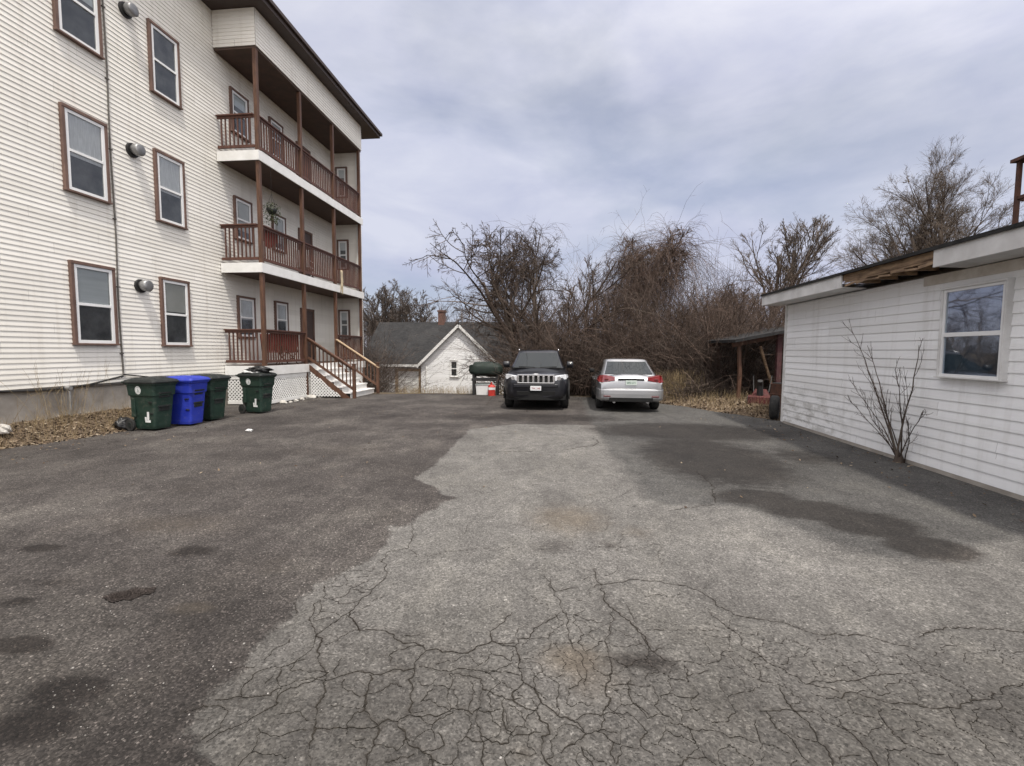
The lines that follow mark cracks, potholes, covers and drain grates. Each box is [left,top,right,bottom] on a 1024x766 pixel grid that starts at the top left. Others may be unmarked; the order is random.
crack [187,443,731,766]
crack [670,613,1024,766]
crack [594,579,1024,648]
